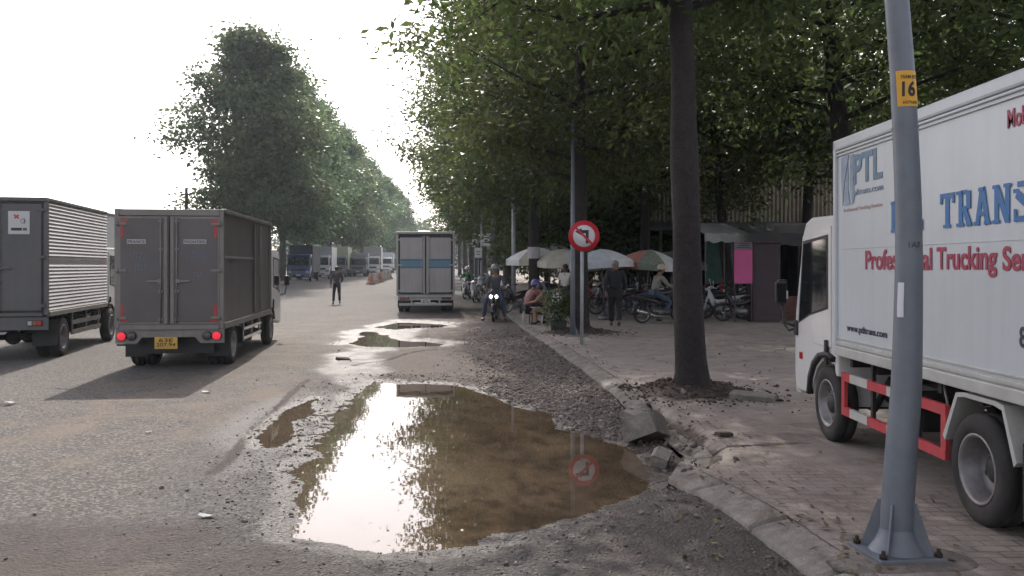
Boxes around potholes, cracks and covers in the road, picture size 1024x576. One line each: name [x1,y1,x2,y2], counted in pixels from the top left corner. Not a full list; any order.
pothole [335,328,462,347]
pothole [250,377,682,563]
pothole [367,320,460,330]
